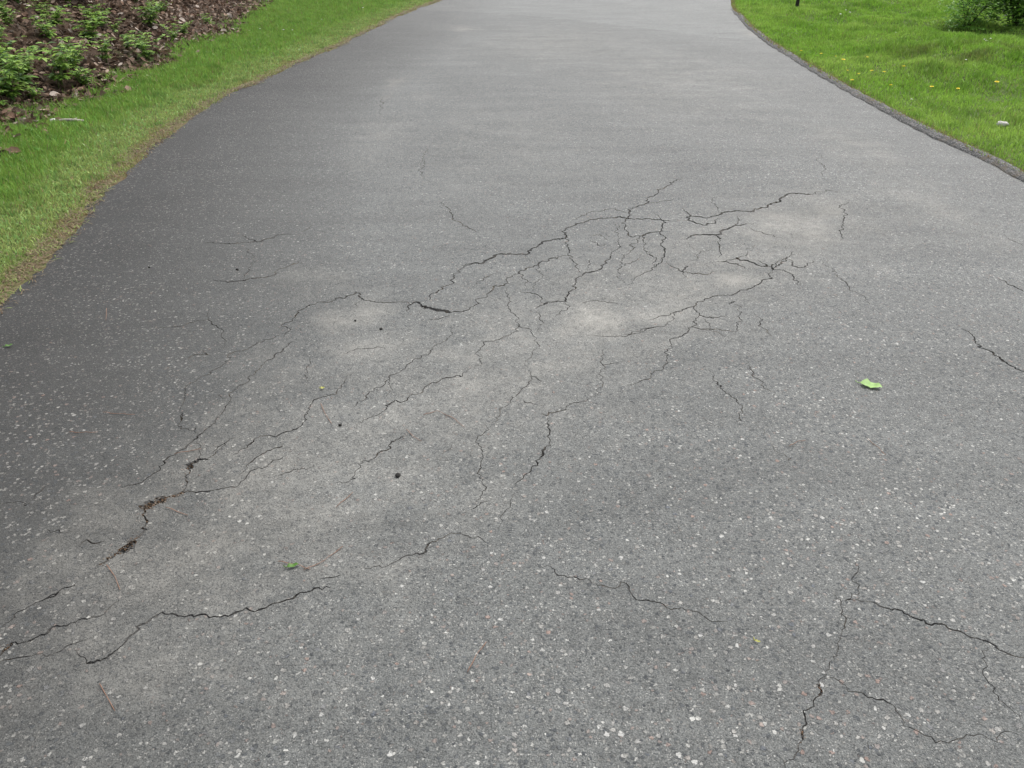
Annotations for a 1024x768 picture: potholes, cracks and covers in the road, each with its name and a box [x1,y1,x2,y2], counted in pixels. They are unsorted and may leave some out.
crack [963,329,1024,372]
crack [208,226,311,311]
crack [0,575,340,664]
crack [47,300,353,566]
crack [326,178,870,569]
crack [784,559,1024,768]
crack [544,566,723,622]
